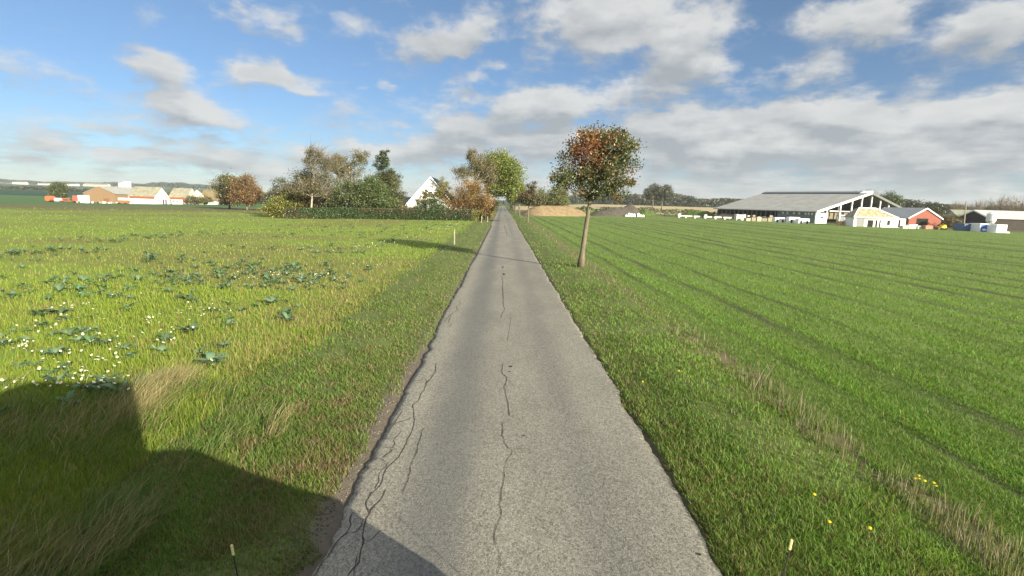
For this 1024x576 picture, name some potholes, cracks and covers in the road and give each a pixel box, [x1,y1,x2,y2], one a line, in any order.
crack [494,365,524,573]
crack [314,366,436,576]
